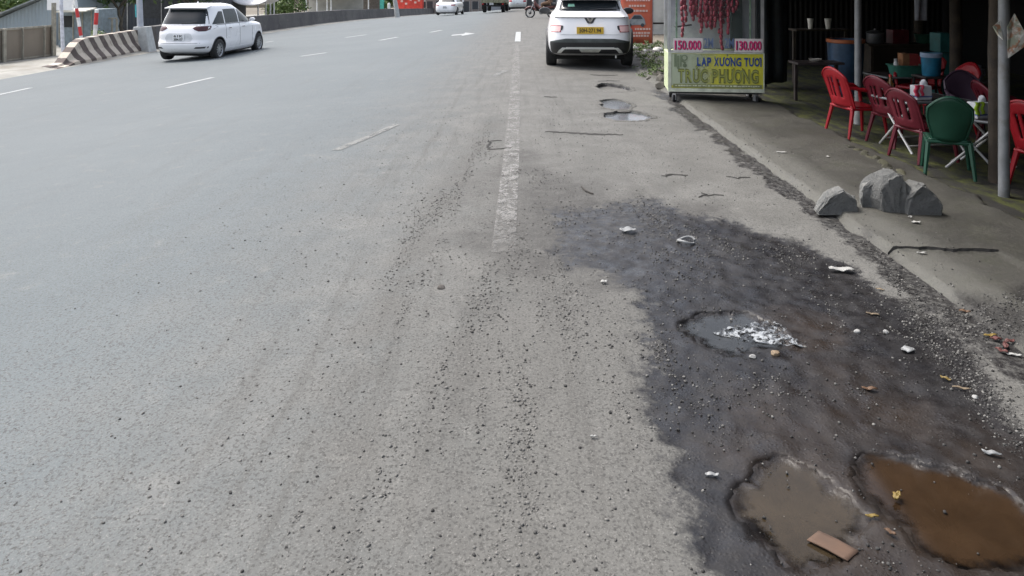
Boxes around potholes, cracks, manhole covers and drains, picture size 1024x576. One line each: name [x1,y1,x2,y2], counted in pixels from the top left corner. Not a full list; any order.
pothole [678,311,788,356]
pothole [596,99,637,112]
pothole [599,109,658,122]
crack [486,140,507,150]
pothole [851,453,1024,572]
crack [661,174,750,197]
pothole [591,82,636,93]
pothole [729,456,871,576]
